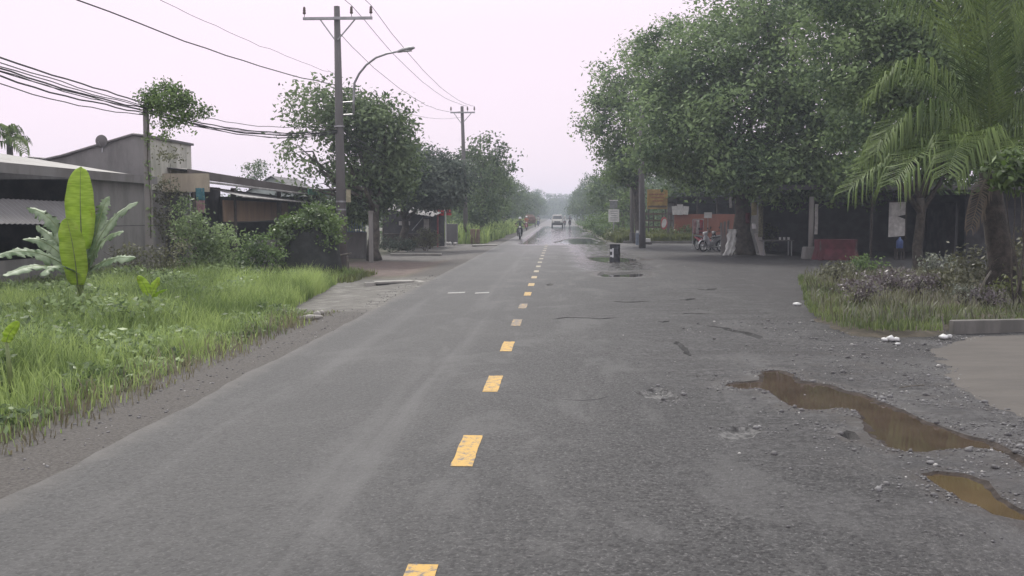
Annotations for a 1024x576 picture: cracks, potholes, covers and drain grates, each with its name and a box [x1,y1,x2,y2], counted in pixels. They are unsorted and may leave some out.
pothole [921,471,1024,520]
pothole [718,427,761,442]
crack [658,288,762,340]
crack [674,341,692,356]
crack [557,301,649,319]
pothole [634,387,680,403]
pothole [725,370,1024,467]
